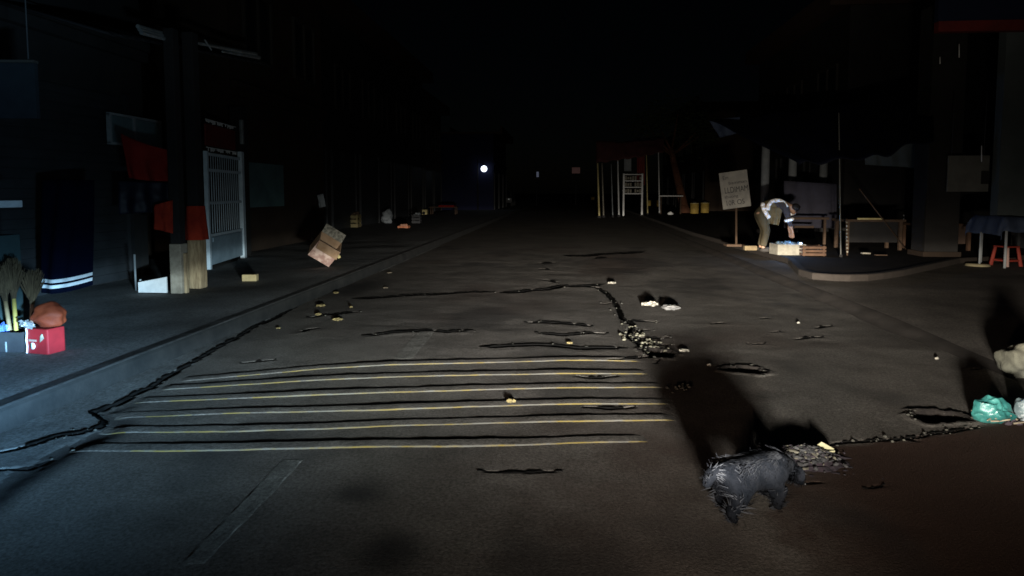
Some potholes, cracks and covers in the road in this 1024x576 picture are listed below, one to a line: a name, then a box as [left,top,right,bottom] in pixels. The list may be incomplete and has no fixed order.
pothole [906,408,976,427]
crack [5,252,672,471]
pothole [716,364,771,376]
crack [746,318,833,344]
crack [820,426,981,446]
